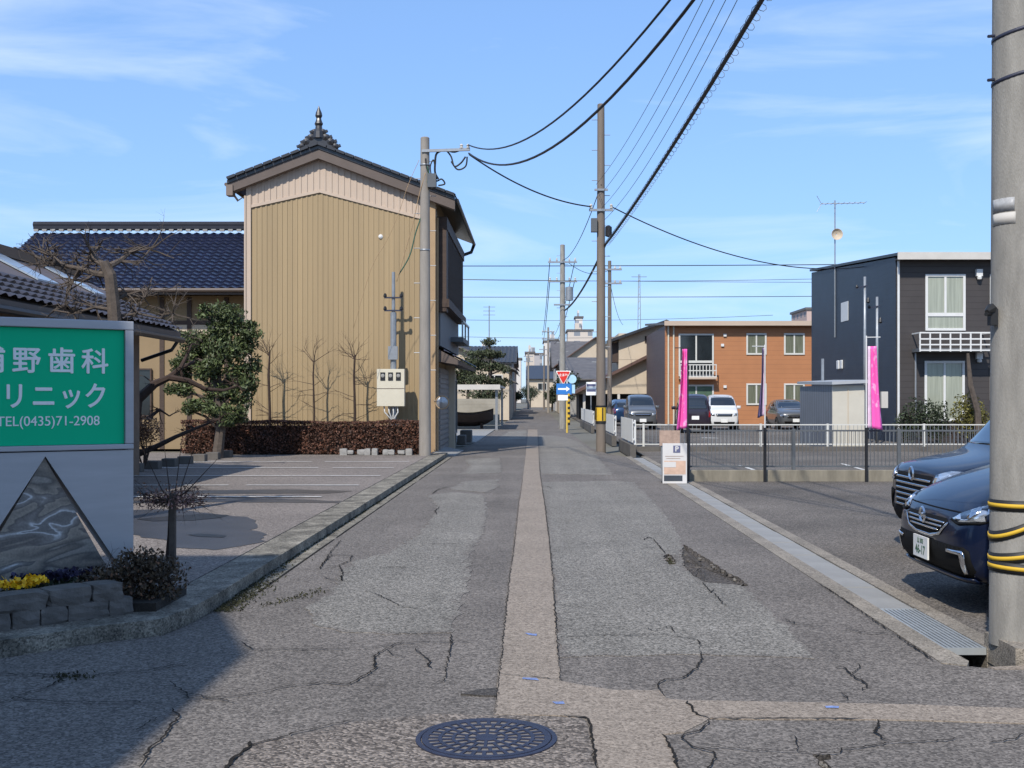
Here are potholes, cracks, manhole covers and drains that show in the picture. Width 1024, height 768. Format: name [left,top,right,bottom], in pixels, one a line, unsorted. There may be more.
crack [294,540,353,581]
manhole cover [415,718,557,761]
crack [0,641,479,767]
drain grate [880,608,986,656]
pothole [681,545,748,586]
crack [565,626,955,768]
